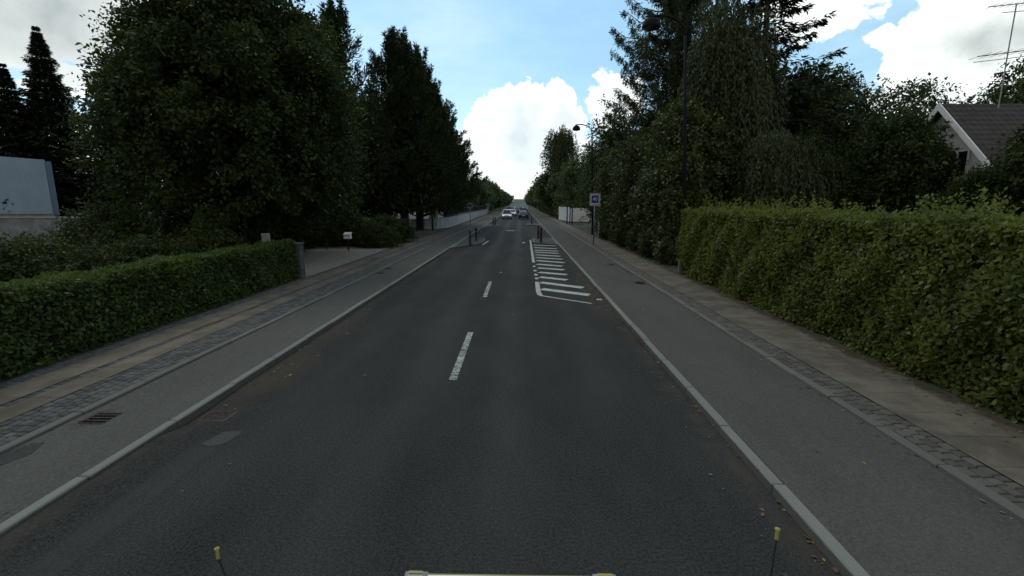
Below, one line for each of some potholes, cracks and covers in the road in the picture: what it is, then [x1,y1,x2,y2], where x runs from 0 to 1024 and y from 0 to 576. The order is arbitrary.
drain grate [74,412,126,425]
drain grate [196,411,238,421]
